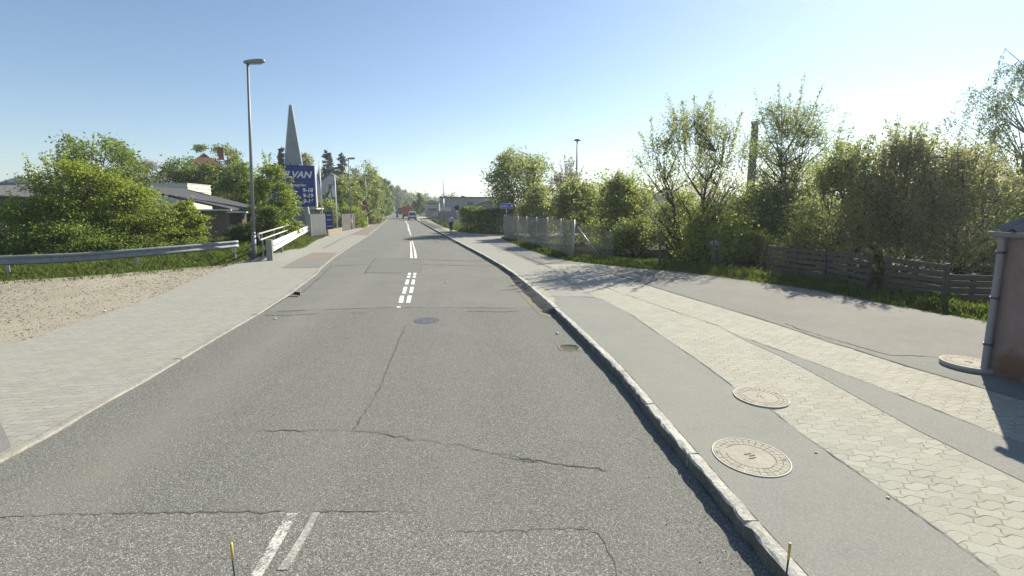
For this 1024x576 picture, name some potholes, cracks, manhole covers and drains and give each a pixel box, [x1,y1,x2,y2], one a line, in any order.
manhole cover [939,355,993,375]
crack [258,326,606,471]
manhole cover [711,438,793,478]
manhole cover [733,387,790,409]
